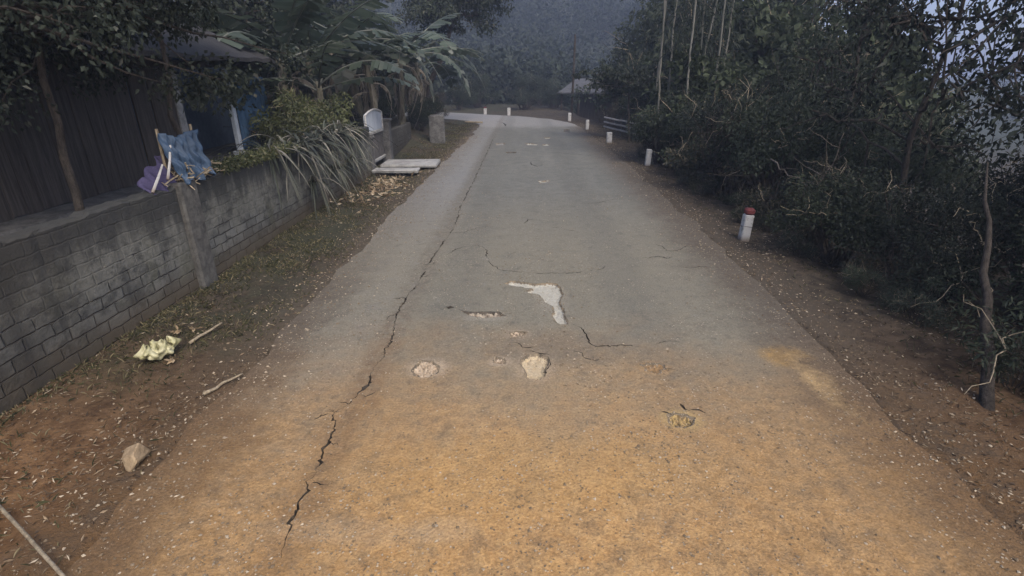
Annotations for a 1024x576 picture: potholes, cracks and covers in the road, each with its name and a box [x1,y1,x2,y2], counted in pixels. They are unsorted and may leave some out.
pothole [666,413,695,428]
pothole [459,309,506,318]
pothole [519,353,550,380]
crack [277,140,605,566]
crack [515,324,636,373]
pothole [411,359,440,378]
